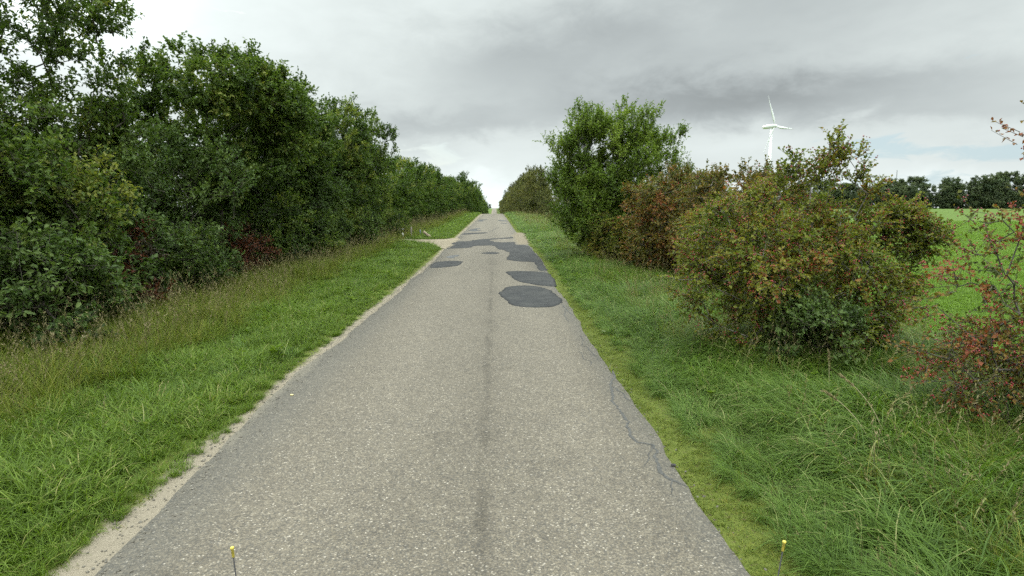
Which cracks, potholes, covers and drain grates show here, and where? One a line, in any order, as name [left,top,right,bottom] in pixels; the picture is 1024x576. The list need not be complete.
crack [563,305,686,495]
